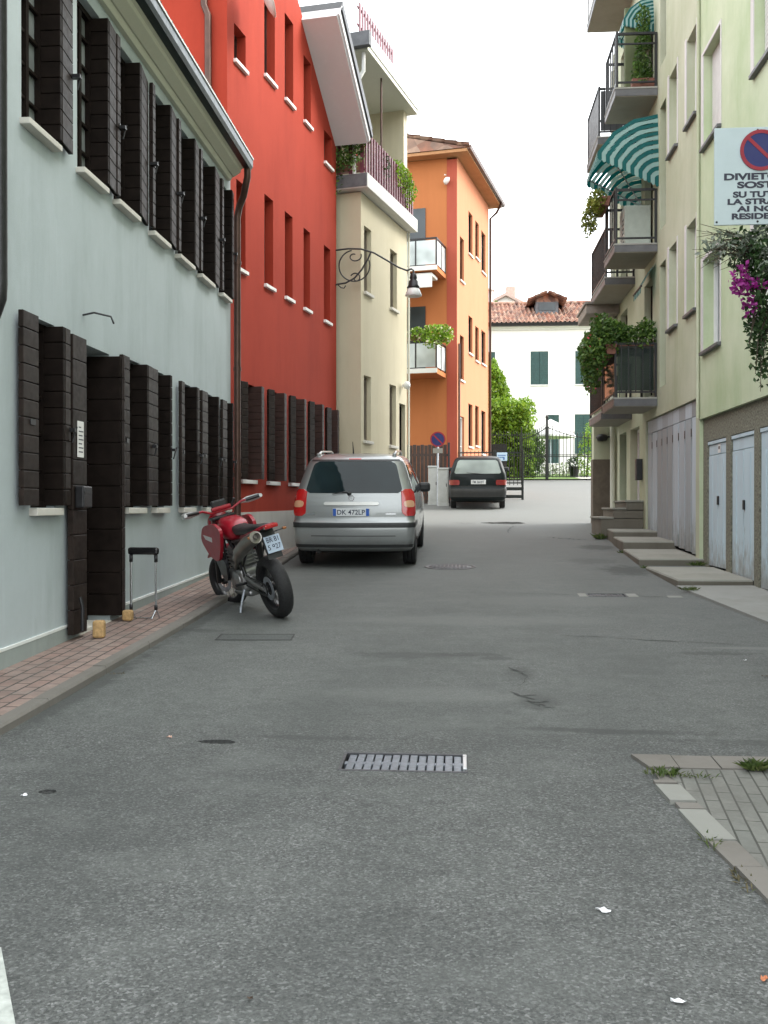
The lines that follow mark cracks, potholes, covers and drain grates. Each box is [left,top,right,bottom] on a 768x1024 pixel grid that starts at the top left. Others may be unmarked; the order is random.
drain grate [338,752,468,773]
crack [508,667,556,708]
